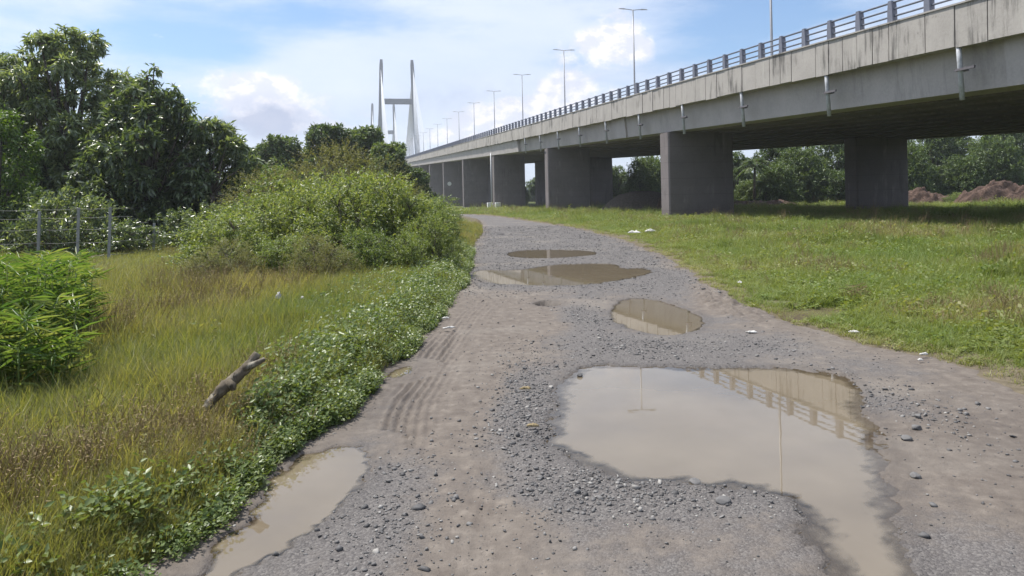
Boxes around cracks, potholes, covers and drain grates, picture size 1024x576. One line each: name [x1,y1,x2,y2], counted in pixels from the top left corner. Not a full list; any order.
pothole [470,263,655,286]
pothole [382,364,418,379]
pothole [187,442,385,576]
pothole [530,362,932,576]
pothole [505,249,599,258]
pothole [607,298,710,336]
